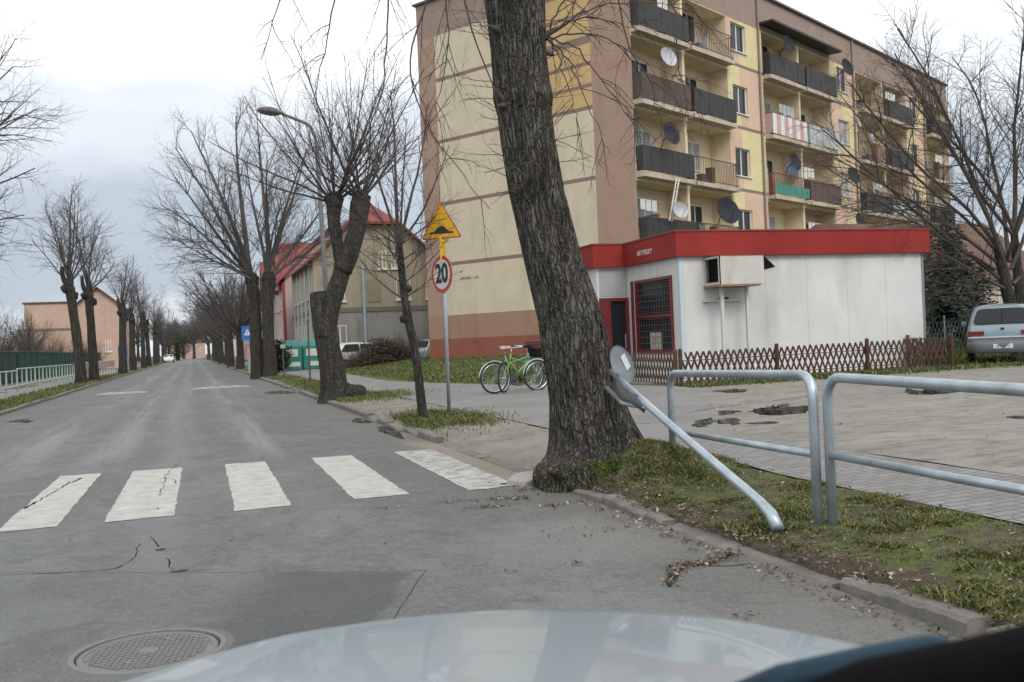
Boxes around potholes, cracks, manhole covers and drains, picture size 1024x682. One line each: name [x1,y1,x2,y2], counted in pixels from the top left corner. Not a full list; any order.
pothole [377,426,404,439]
manhole cover [59,627,234,679]
pothole [748,404,808,415]
pothole [686,417,740,428]
crack [7,537,215,575]
